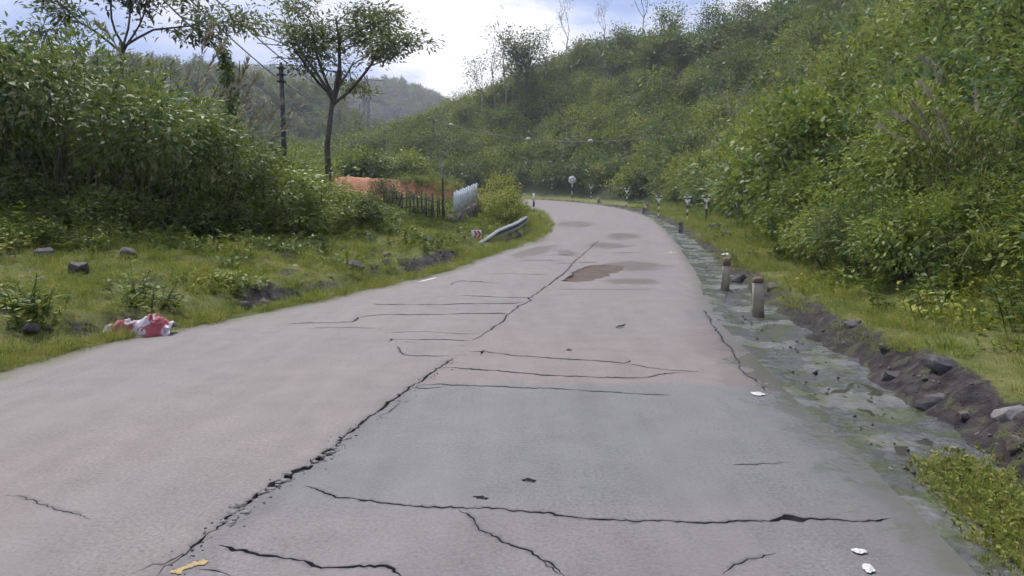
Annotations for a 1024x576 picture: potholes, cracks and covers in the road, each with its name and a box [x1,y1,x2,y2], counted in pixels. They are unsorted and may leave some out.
crack [132,241,889,576]
crack [6,495,90,520]
